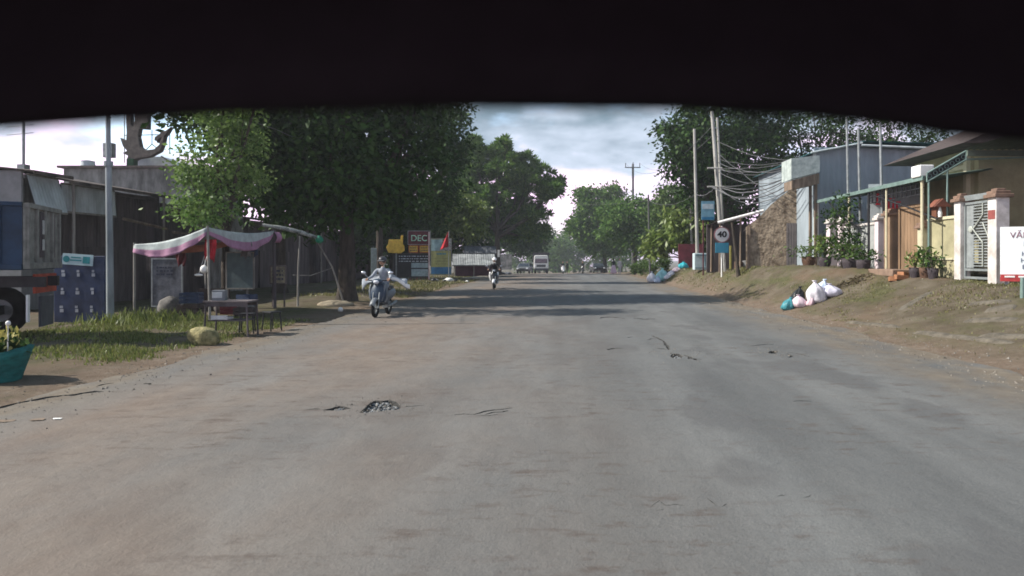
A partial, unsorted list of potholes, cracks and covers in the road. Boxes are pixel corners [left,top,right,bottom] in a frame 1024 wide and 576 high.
pothole [360,400,401,413]
crack [457,408,509,416]
crack [647,336,699,361]
